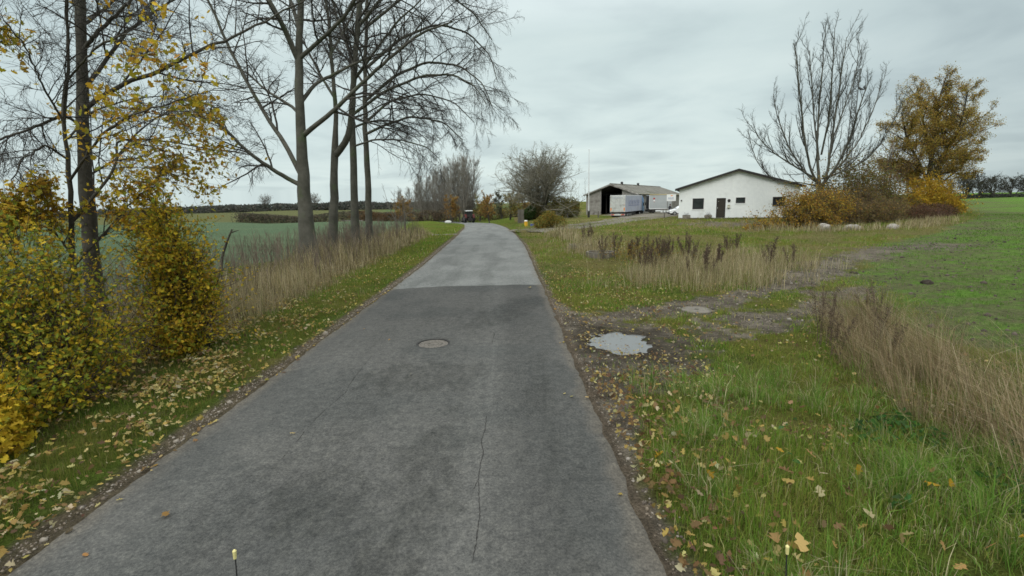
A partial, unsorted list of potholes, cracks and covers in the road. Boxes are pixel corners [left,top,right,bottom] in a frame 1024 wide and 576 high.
manhole cover [681,306,712,314]
crack [472,414,487,561]
manhole cover [416,339,450,348]
